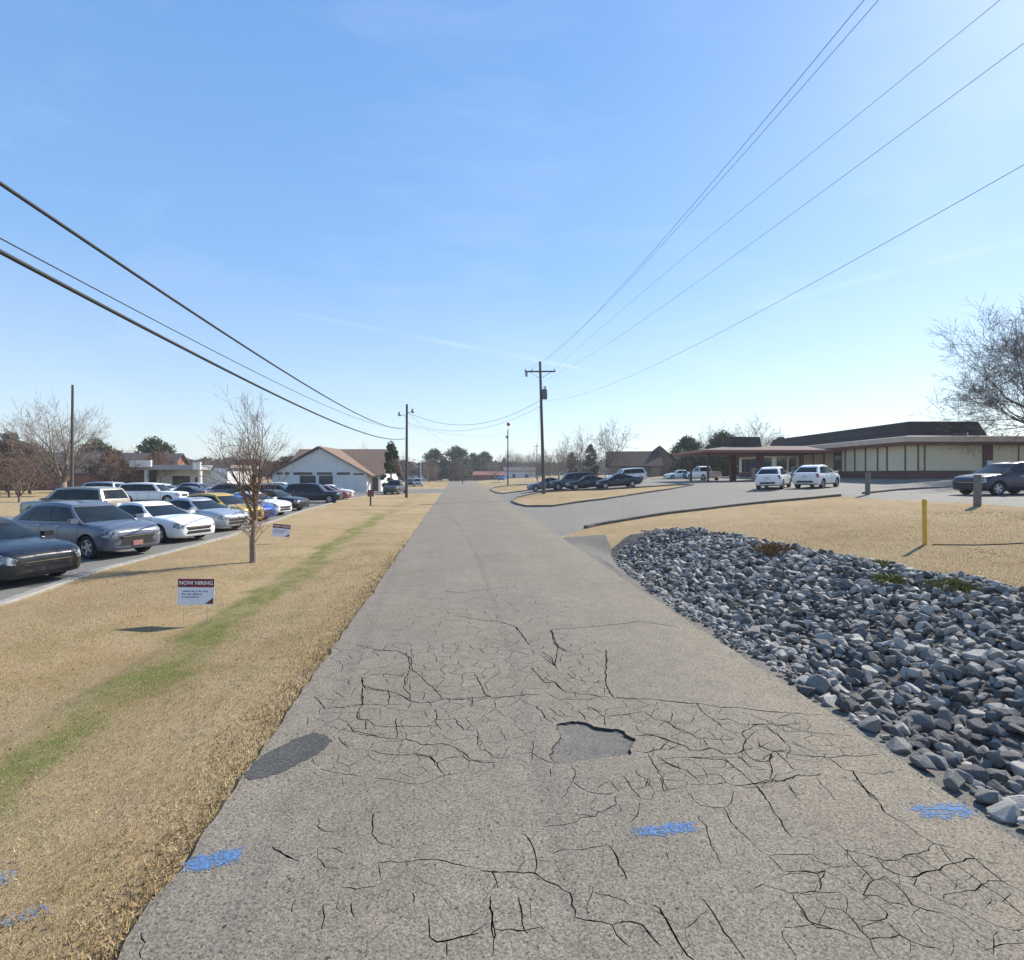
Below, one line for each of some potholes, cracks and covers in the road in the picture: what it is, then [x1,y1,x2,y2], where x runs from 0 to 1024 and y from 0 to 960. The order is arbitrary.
crack [272,819,346,882]
pothole [549,721,636,764]
crack [291,582,1024,960]
